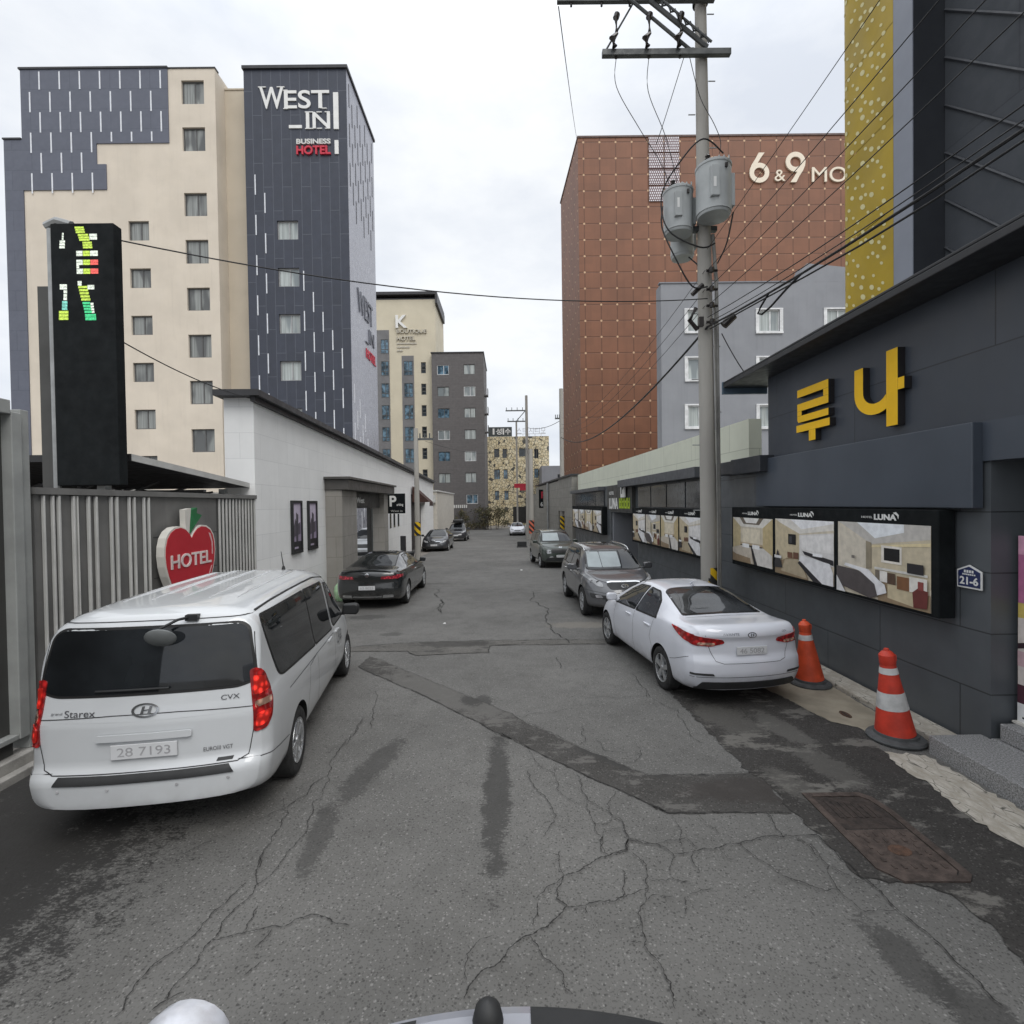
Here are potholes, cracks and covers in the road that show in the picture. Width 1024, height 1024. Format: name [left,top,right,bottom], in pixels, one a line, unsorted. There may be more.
crack [115,691,377,1017]
manhole cover [802,792,972,884]
crack [356,591,787,813]
crack [464,751,818,1008]
